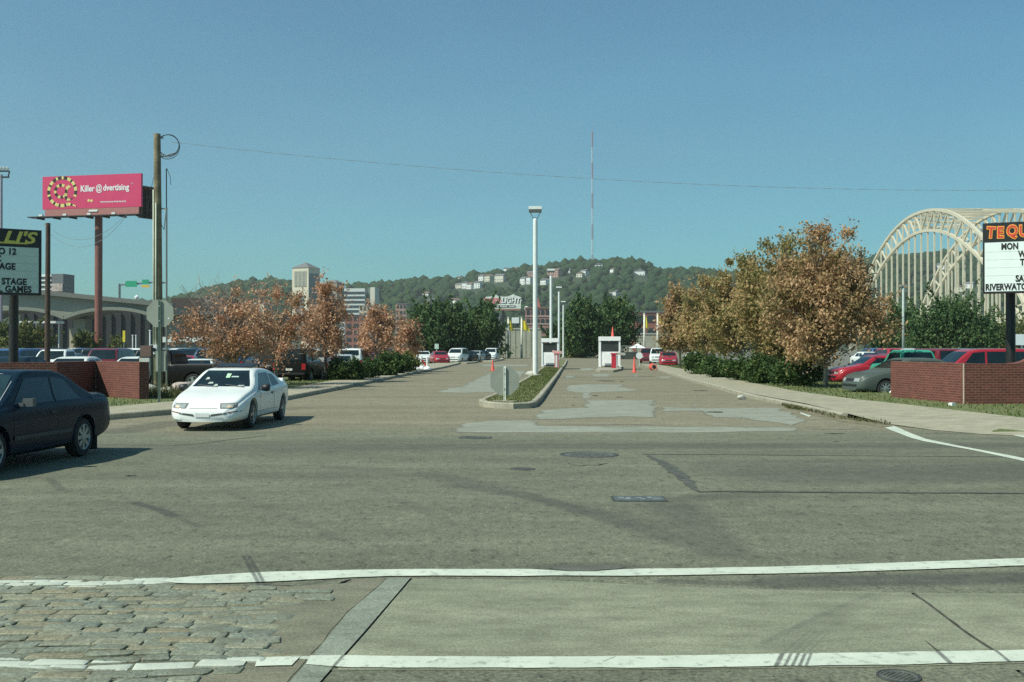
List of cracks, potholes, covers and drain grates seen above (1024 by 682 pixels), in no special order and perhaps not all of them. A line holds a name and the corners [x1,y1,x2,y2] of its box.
manhole cover [876,669,922,682]
